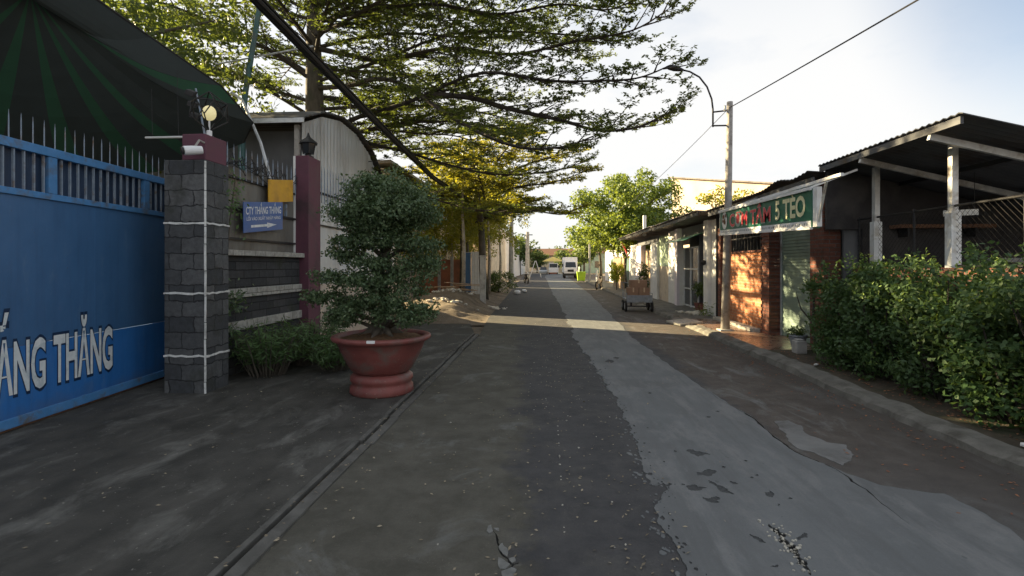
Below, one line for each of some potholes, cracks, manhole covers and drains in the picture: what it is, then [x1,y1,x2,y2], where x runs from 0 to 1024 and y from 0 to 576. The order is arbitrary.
pothole [686,450,736,503]
